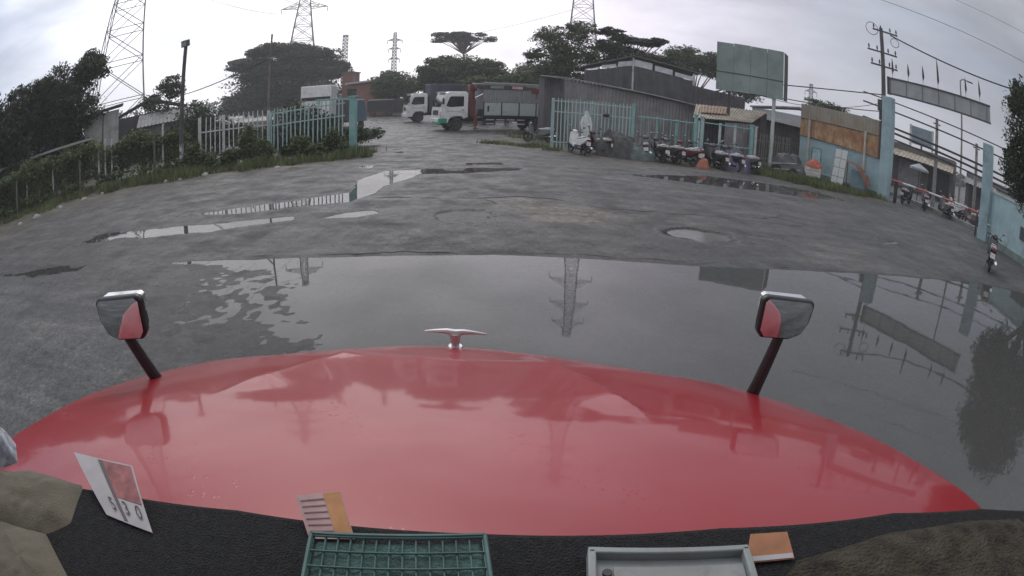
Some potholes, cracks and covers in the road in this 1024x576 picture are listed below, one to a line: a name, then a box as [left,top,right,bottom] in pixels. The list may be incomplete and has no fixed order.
pothole [651,226,744,247]
